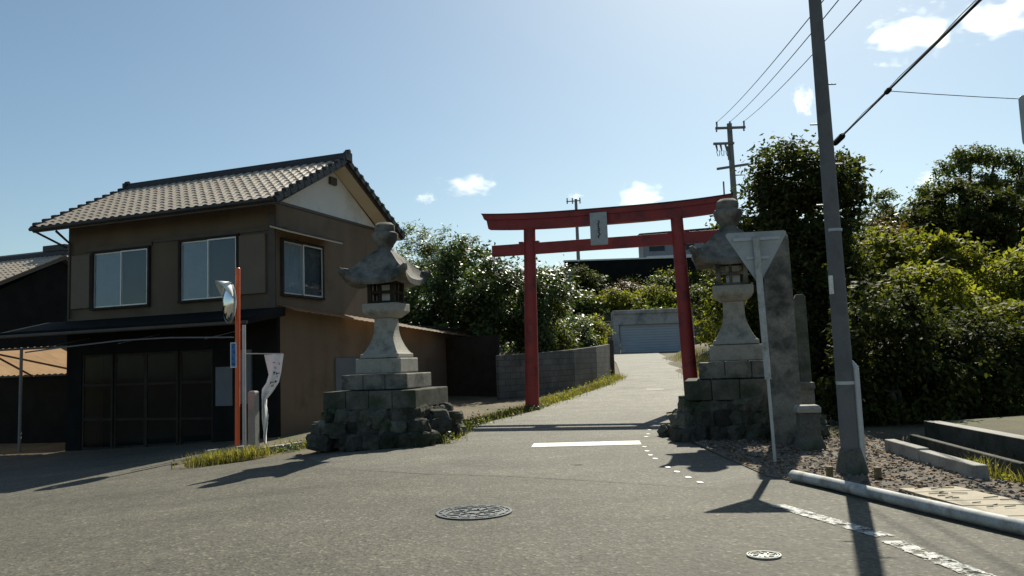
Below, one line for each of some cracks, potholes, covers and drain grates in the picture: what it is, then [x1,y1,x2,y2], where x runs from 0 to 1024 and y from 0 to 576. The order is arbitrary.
manhole cover [436,505,512,520]
manhole cover [747,550,782,560]
